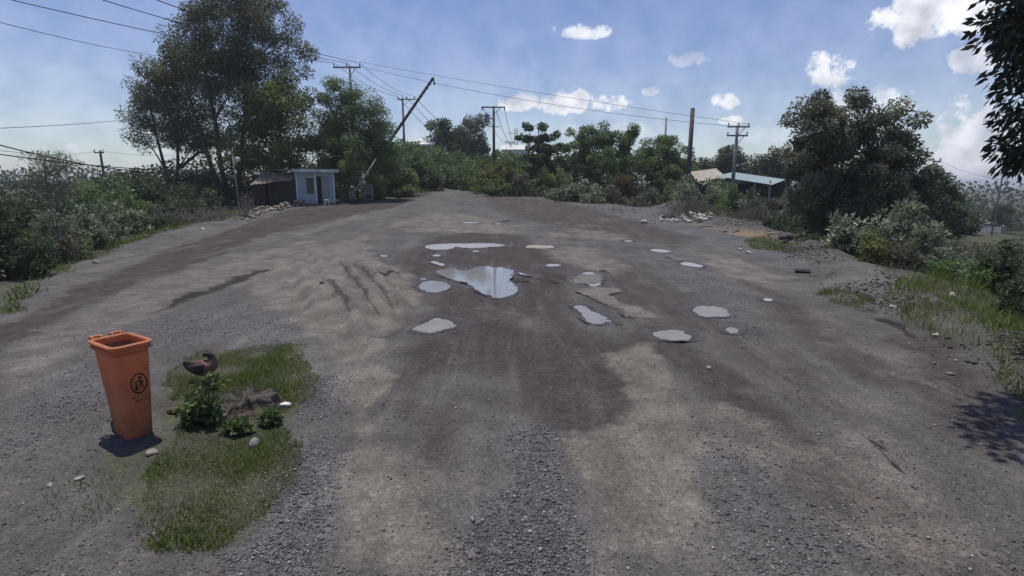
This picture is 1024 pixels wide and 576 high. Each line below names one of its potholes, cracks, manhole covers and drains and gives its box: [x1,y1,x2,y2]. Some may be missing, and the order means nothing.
pothole [413,280,453,294]
pothole [716,326,746,335]
pothole [682,305,737,319]
pothole [571,274,606,287]
pothole [432,265,525,299]
pothole [639,328,702,342]
pothole [569,303,616,326]
pothole [407,314,465,335]
crack [863,436,906,474]
